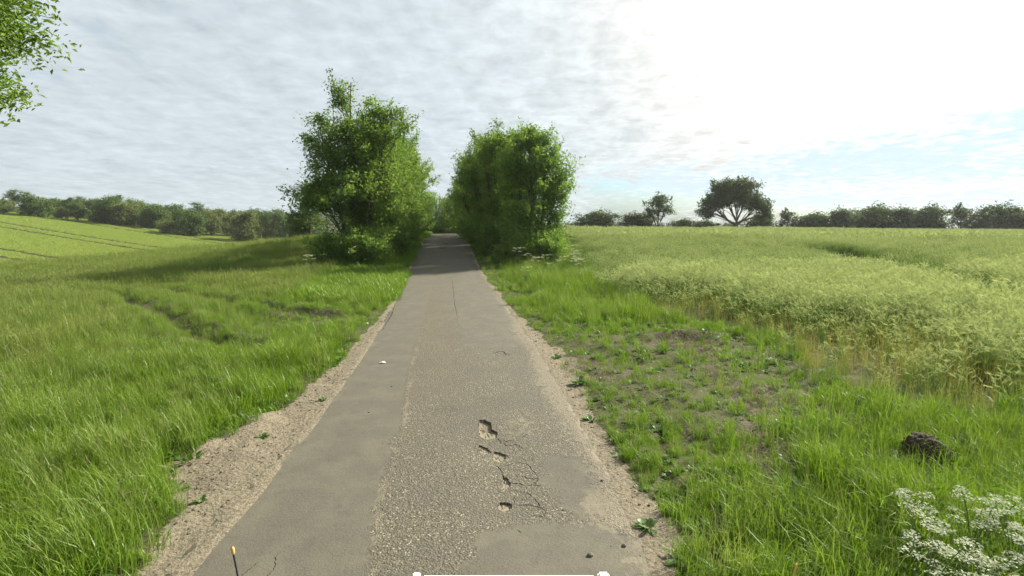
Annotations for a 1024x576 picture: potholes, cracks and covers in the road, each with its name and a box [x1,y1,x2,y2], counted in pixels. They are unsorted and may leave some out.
pothole [497,502,512,511]
pothole [491,451,506,463]
pothole [478,419,498,440]
crack [476,434,546,532]
